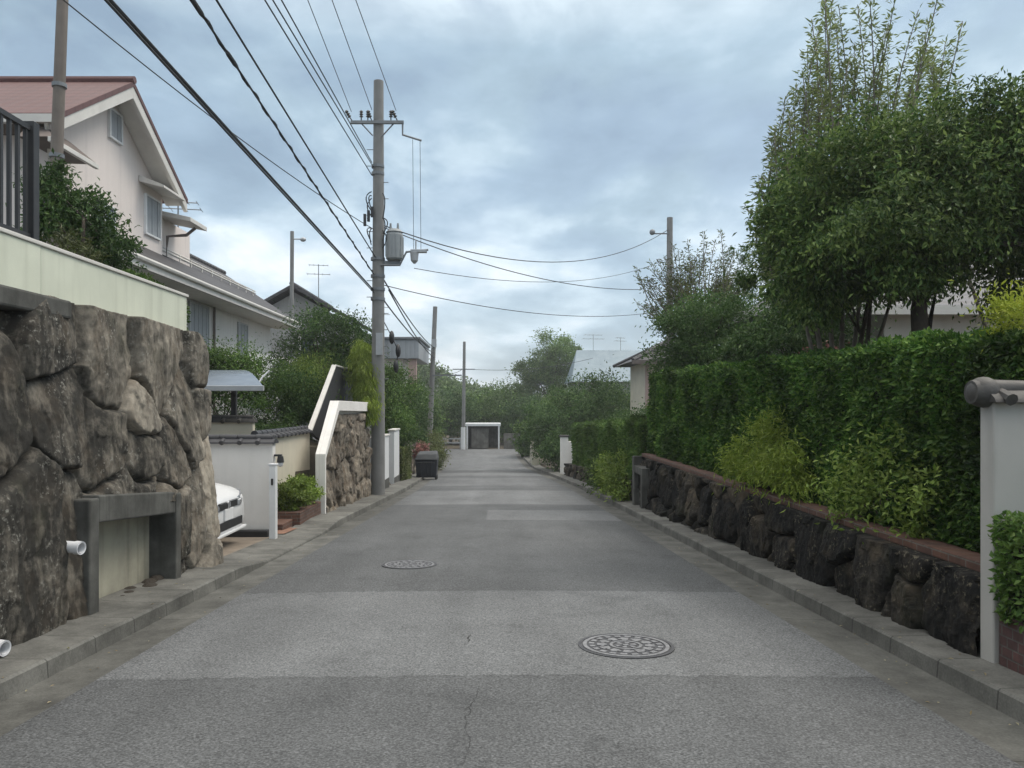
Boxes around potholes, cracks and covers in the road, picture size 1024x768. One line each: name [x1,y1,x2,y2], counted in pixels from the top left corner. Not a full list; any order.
manhole cover [578,633,675,659]
manhole cover [382,560,437,569]
